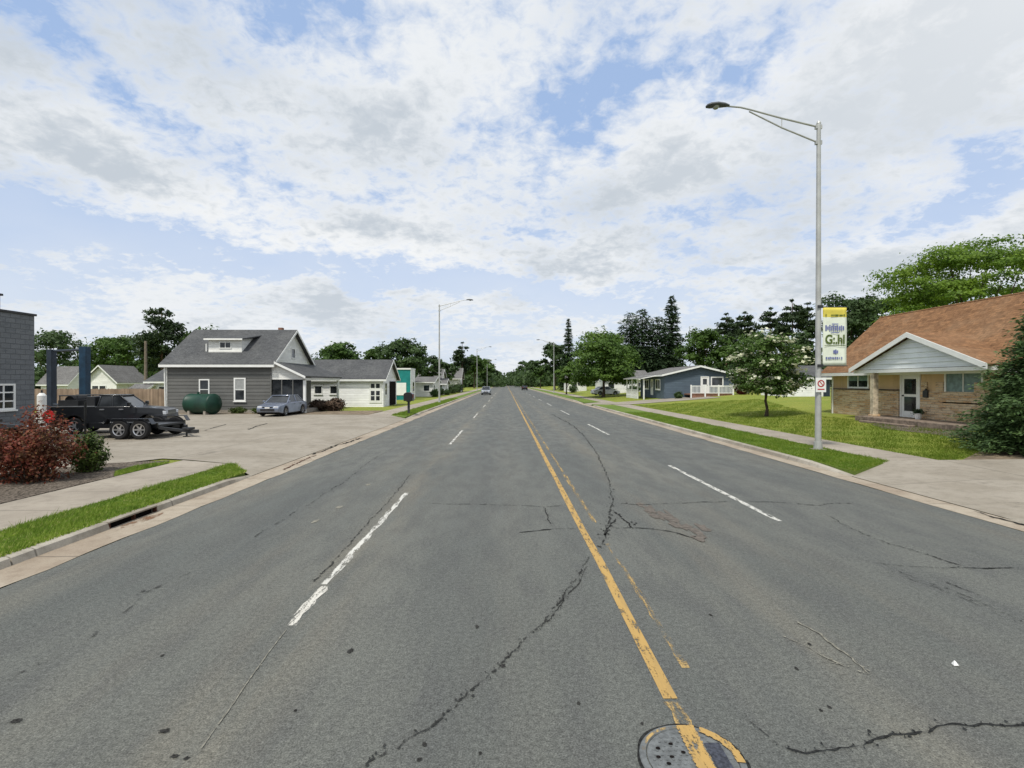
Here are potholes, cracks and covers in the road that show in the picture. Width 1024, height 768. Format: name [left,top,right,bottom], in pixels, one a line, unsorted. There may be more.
crack [439,503,575,532]
crack [365,556,590,766]
manhole cover [637,723,751,768]
crack [751,501,1015,621]
crack [283,438,360,469]
drain grate [103,505,163,529]
crack [555,416,725,547]
crack [745,716,1024,754]
